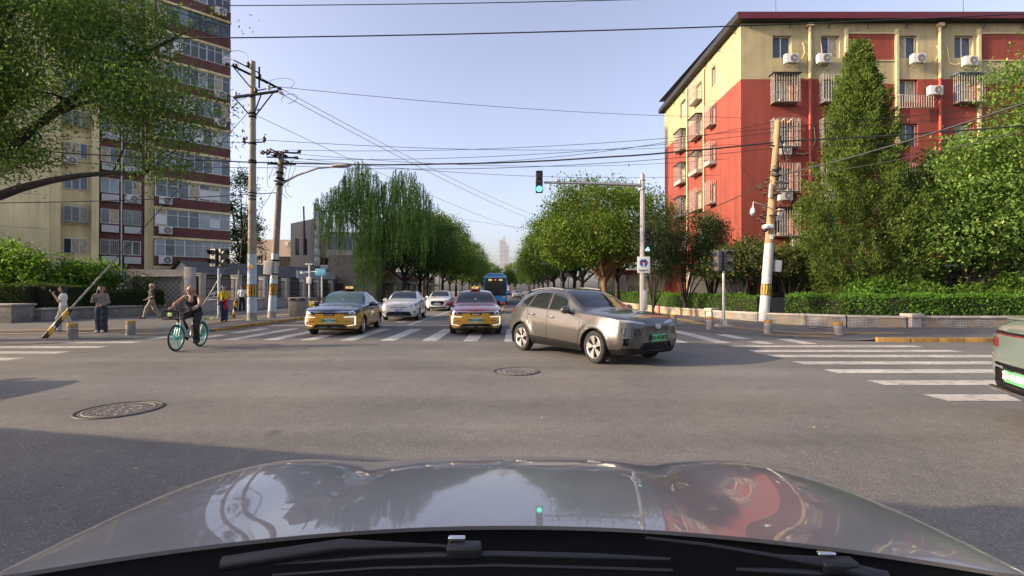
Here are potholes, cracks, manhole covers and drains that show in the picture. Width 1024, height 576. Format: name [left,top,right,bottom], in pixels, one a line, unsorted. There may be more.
manhole cover [71,401,165,420]
manhole cover [493,367,540,376]
